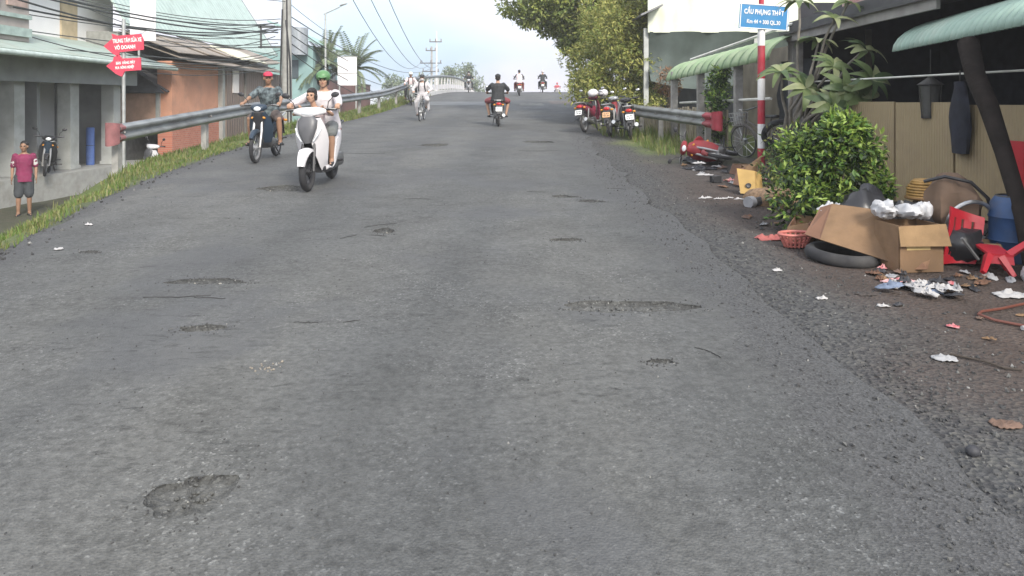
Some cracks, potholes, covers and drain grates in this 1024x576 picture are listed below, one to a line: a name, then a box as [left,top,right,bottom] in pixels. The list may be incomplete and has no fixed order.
pothole [564,300,703,314]
pothole [180,324,228,332]
pothole [143,475,240,520]
